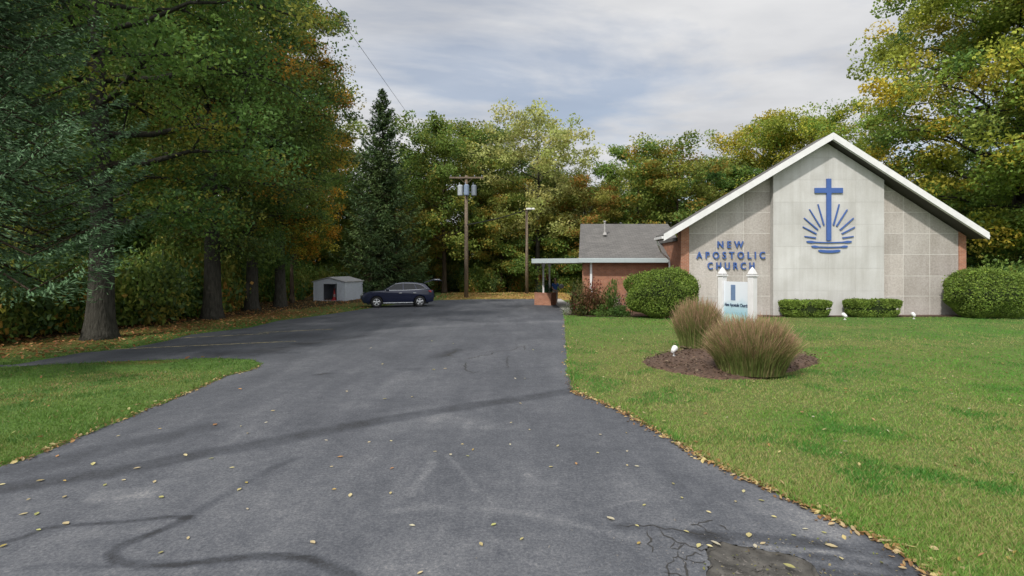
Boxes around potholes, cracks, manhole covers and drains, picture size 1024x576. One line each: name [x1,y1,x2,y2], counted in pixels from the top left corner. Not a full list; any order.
pothole [706,541,820,576]
crack [620,520,729,576]
crack [442,346,525,373]
